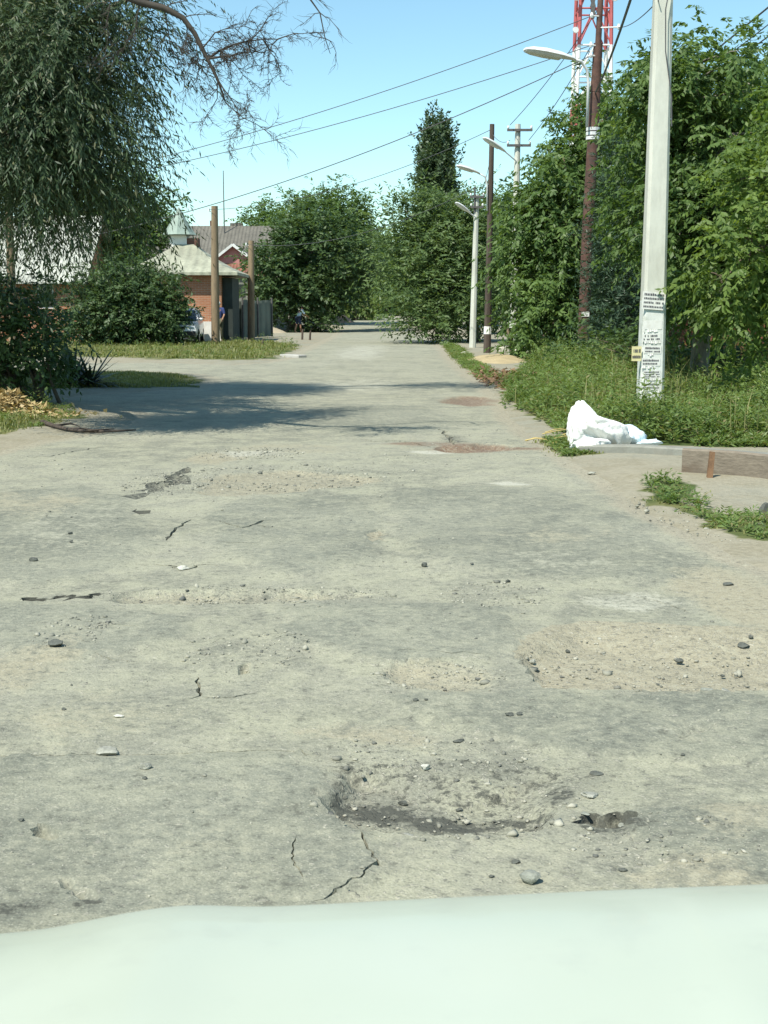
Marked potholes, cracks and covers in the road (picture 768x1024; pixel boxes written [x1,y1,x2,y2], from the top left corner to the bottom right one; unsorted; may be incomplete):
pothole [122,467,191,499]
crack [291,838,303,879]
pothole [317,756,584,837]
pothole [572,811,638,829]
crack [190,676,259,699]
crack [165,520,191,540]
crack [218,520,272,544]
crack [355,429,455,447]
crack [309,831,380,902]
